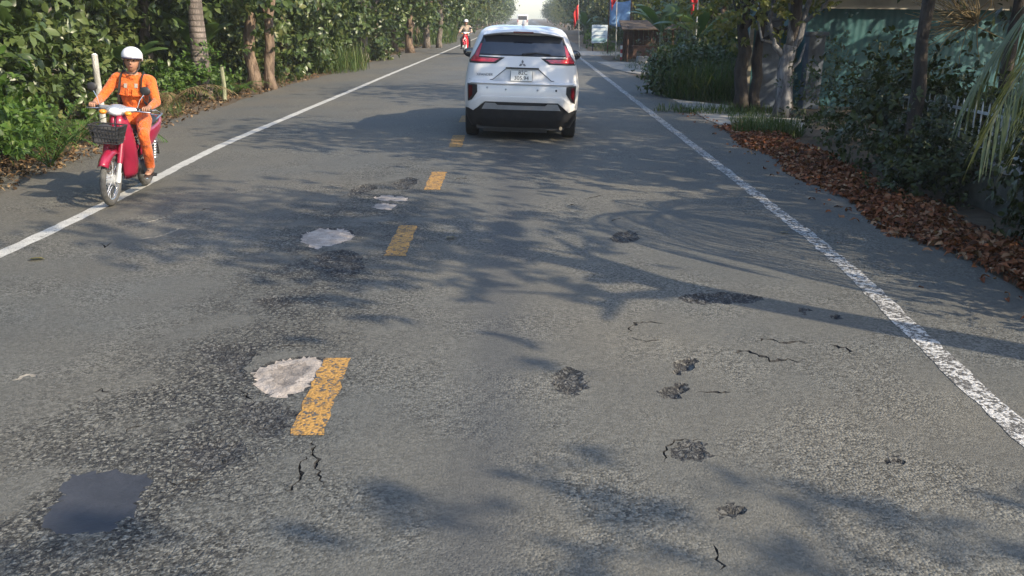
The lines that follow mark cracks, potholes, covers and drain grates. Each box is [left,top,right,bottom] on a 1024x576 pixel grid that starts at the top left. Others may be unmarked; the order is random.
pothole [610,230,640,243]
pothole [879,453,906,466]
crack [735,338,810,362]
pothole [672,357,699,376]
crack [627,321,663,342]
pothole [716,502,747,520]
pothole [549,367,590,396]
crack [288,441,324,492]
pothole [656,382,690,399]
pothole [666,439,714,463]
crack [713,544,726,570]
pothole [677,292,764,305]
